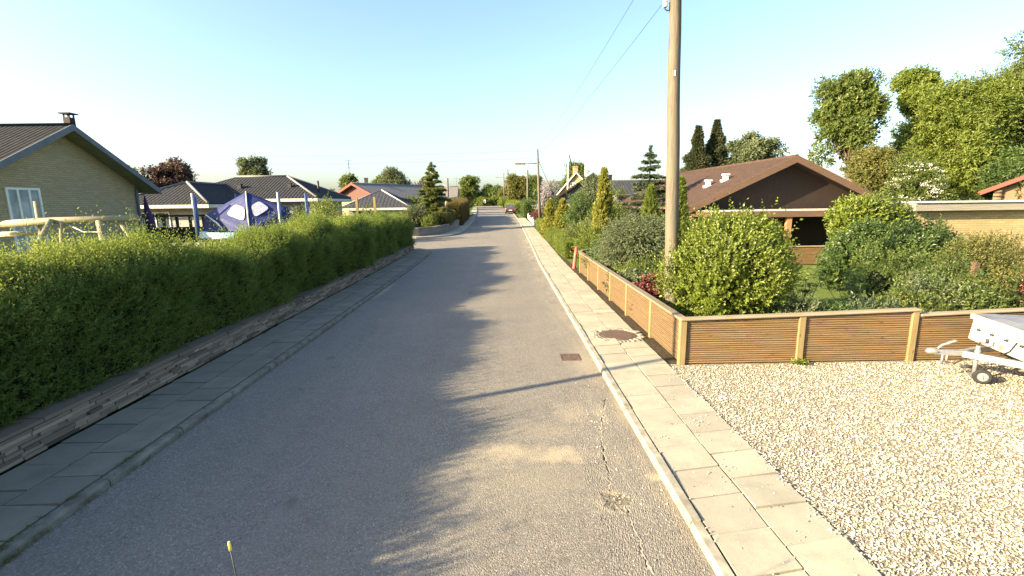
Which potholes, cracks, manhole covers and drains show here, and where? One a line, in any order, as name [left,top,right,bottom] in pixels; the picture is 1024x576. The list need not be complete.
crack [599,401,614,489]
manhole cover [590,327,646,343]
drain grate [560,353,581,361]
crack [627,512,655,576]
